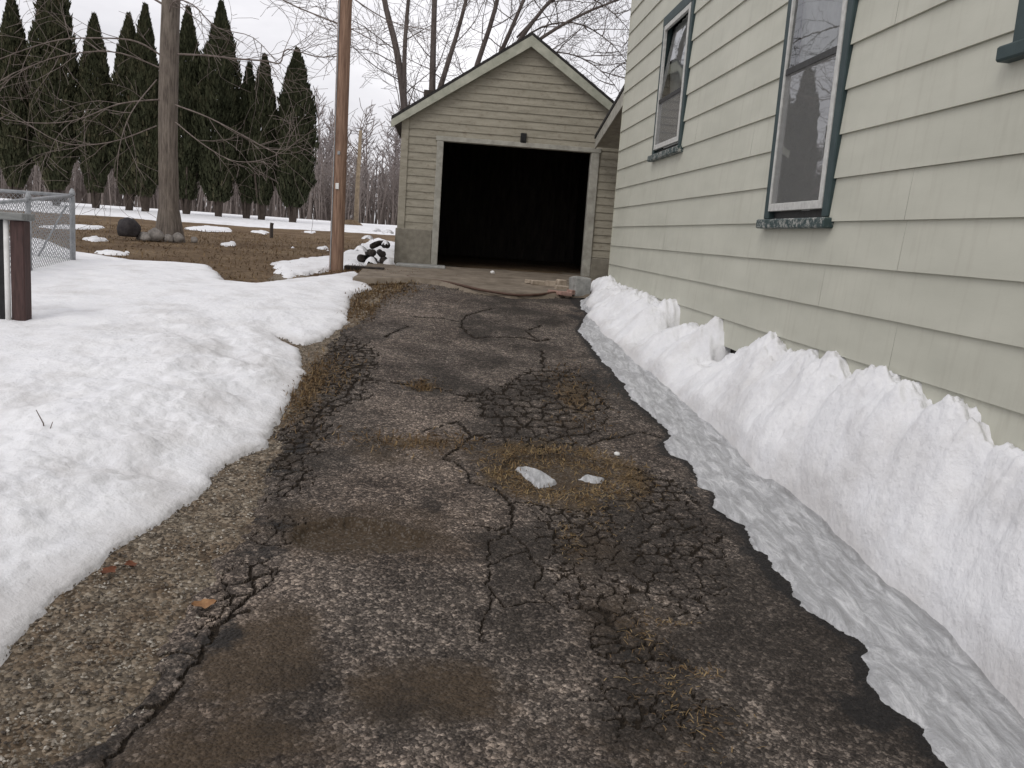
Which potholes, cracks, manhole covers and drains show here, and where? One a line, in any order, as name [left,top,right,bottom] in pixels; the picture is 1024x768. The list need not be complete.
crack [102,308,735,768]
